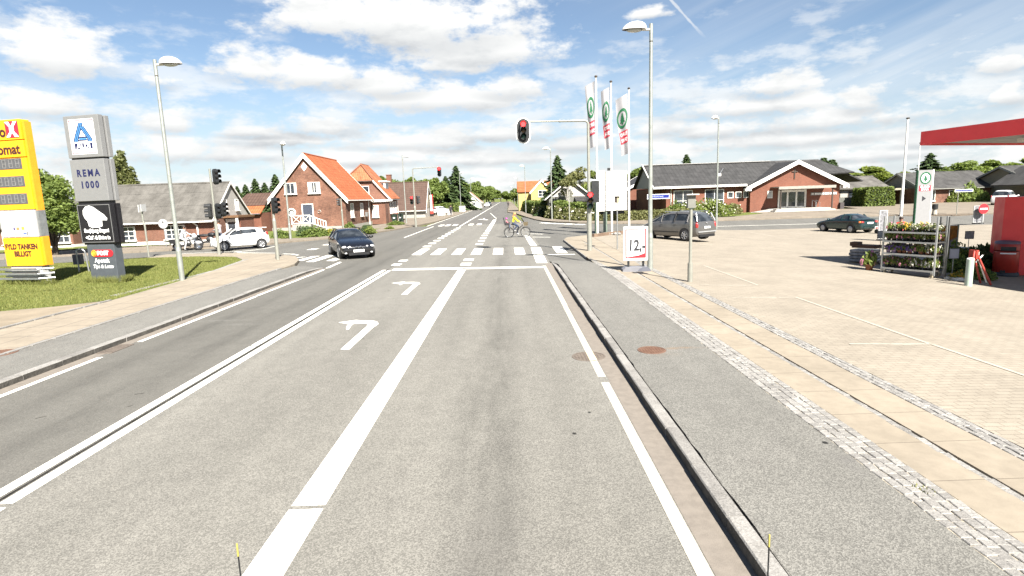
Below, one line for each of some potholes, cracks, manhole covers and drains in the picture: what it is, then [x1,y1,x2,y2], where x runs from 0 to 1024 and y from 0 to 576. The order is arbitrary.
manhole cover [637,346,666,354]
manhole cover [572,352,606,361]
